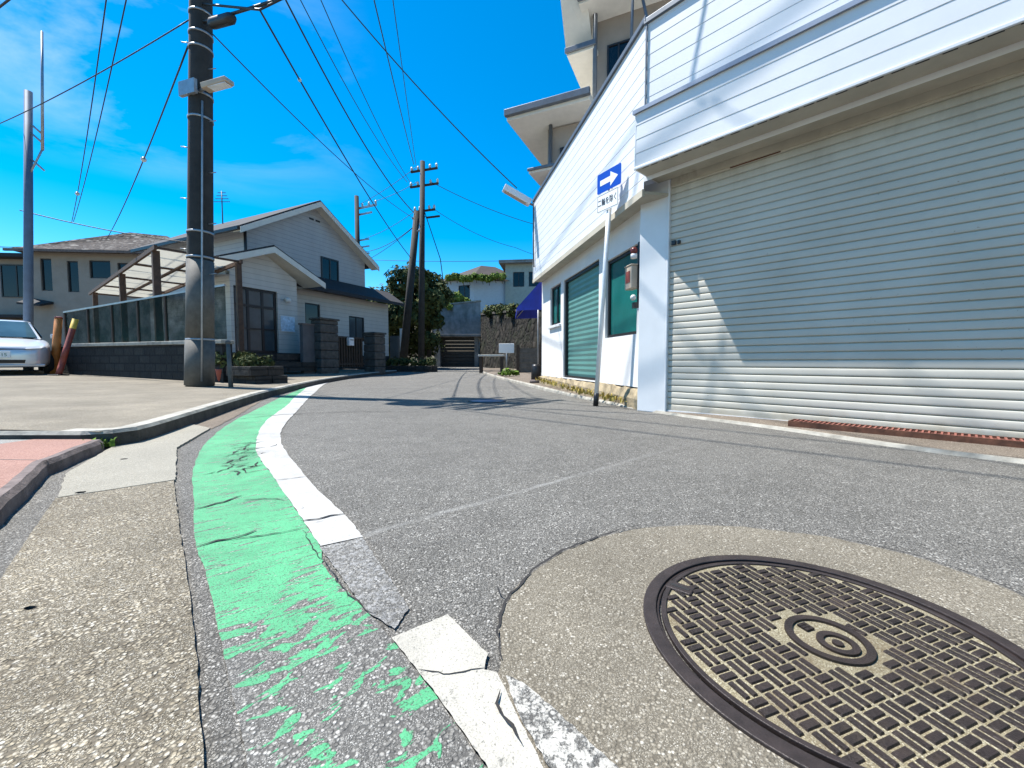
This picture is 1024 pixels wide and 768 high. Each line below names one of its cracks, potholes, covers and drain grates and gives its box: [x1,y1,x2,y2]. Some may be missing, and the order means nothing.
crack [194,495,284,509]
drain grate [788,419,1024,448]
crack [495,689,523,744]
manhole cover [643,555,1024,768]
crack [207,439,277,475]
